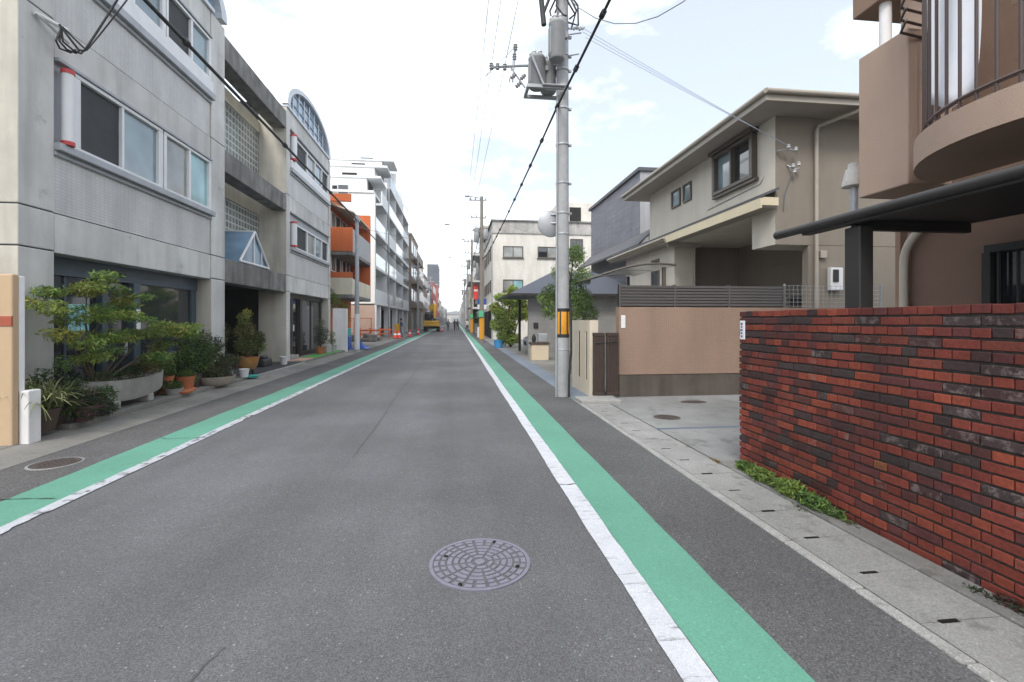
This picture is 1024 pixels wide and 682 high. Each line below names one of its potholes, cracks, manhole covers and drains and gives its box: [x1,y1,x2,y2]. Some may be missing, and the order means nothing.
manhole cover [429,538,530,592]
manhole cover [24,457,85,471]
crack [189,647,225,682]
